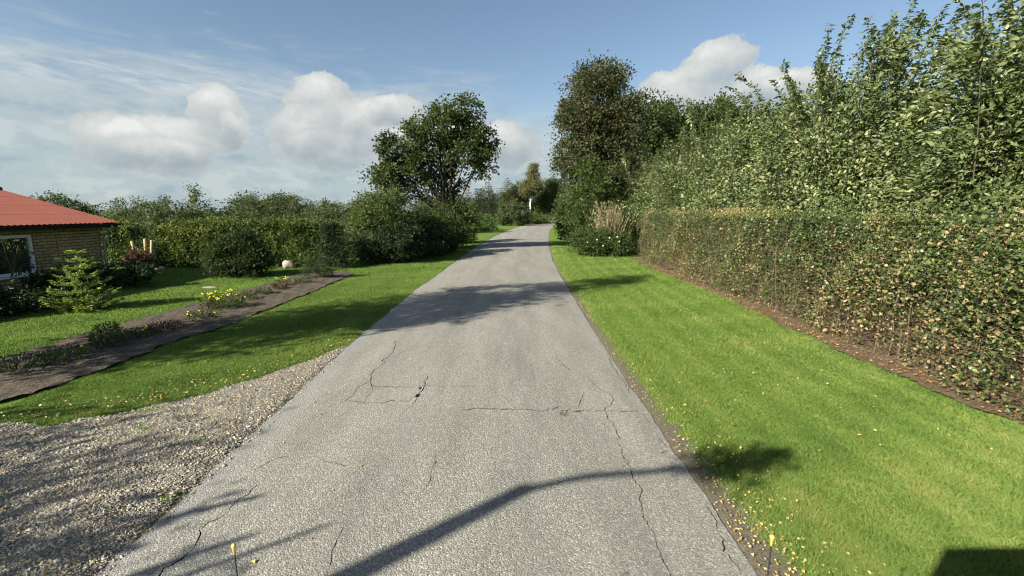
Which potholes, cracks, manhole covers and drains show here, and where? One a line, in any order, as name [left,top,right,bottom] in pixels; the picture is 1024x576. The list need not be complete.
crack [344,340,474,407]
crack [158,446,297,576]
crack [461,355,671,576]
